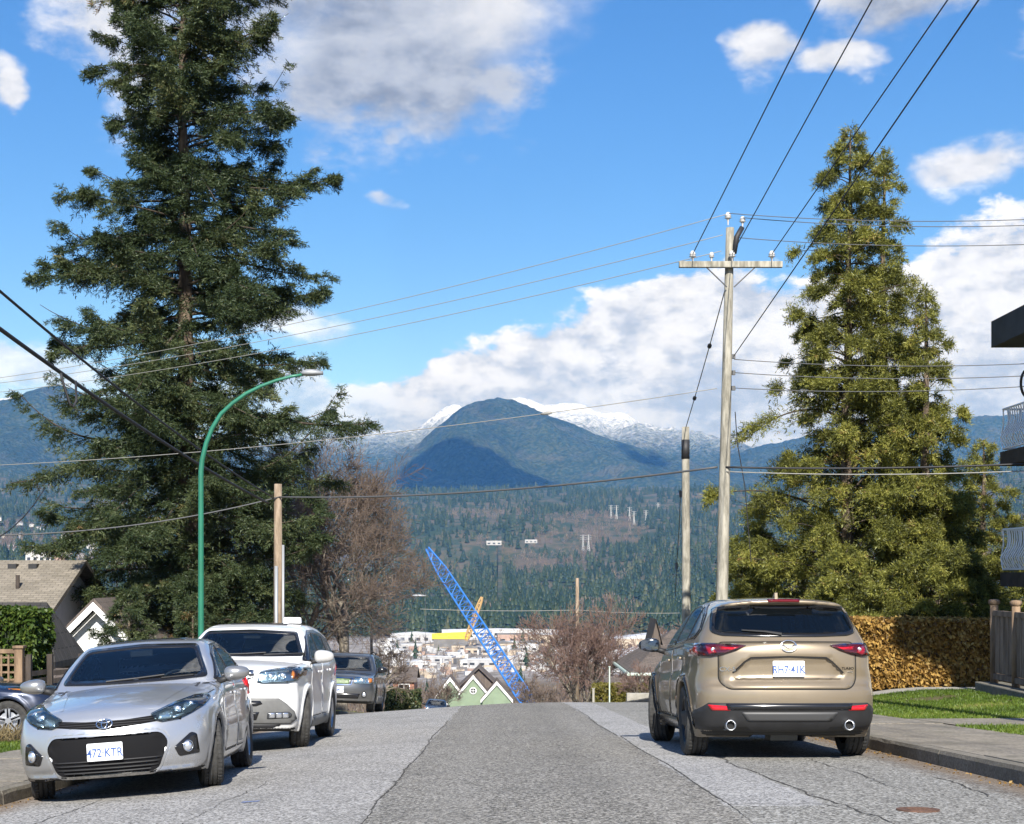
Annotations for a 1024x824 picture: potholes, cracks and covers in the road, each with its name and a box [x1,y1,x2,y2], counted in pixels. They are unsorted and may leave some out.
crack [717,756,895,824]
